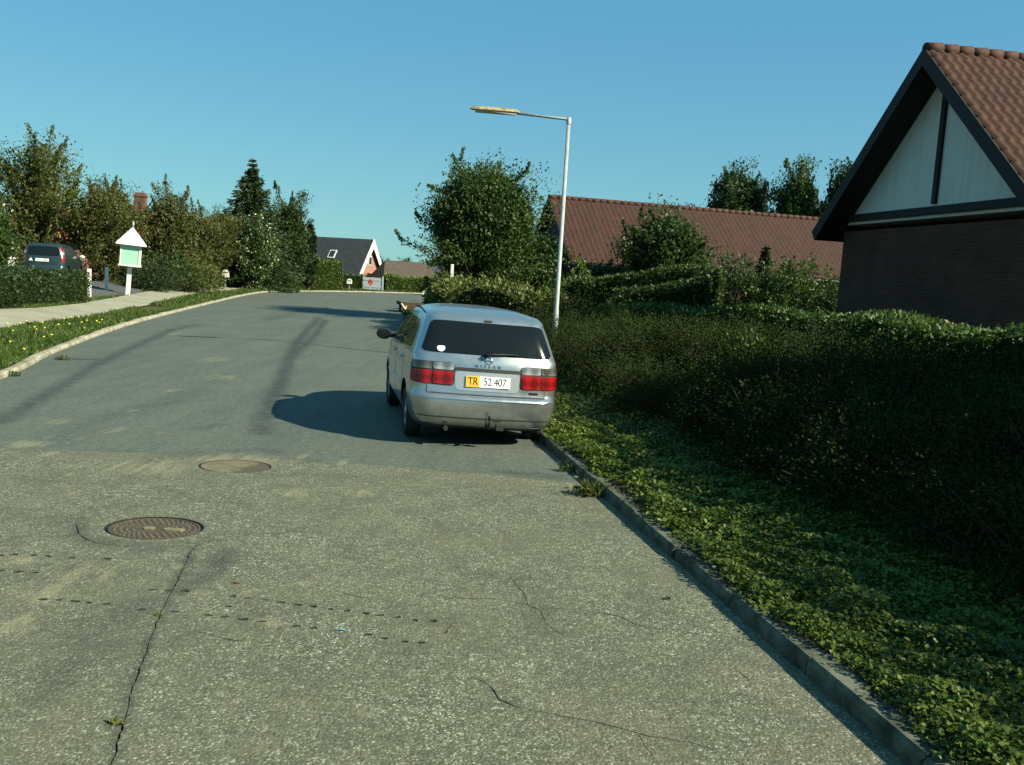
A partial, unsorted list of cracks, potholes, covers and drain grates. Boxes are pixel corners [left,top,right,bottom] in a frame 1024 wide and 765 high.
manhole cover [104,517,205,539]
manhole cover [198,460,272,473]
crack [109,545,339,765]
crack [478,679,707,759]
crack [463,576,660,635]
